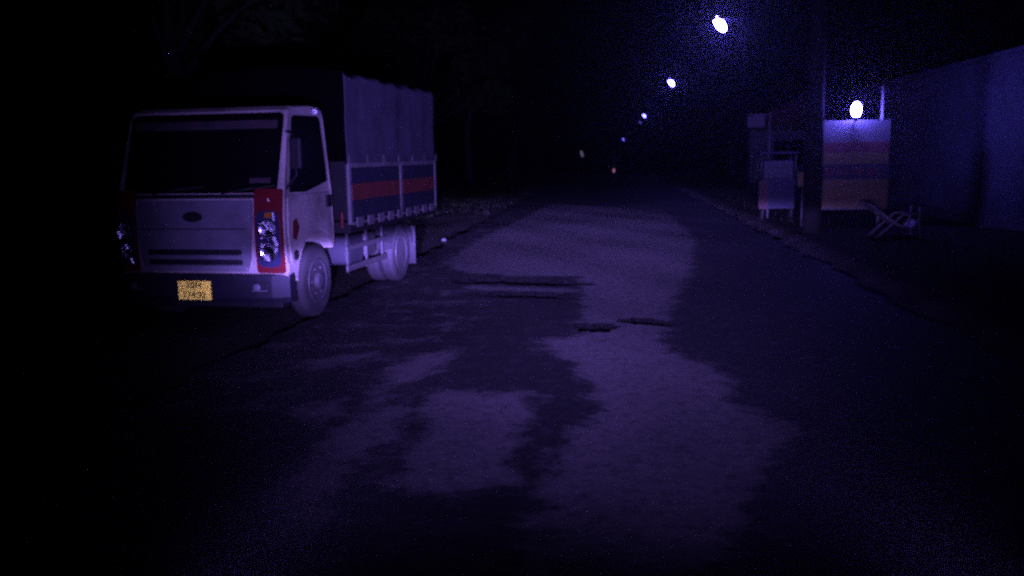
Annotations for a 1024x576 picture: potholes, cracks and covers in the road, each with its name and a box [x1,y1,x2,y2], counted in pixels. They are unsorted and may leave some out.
pothole [602,315,688,329]
pothole [436,276,606,288]
pothole [558,321,635,335]
pothole [453,290,591,301]
